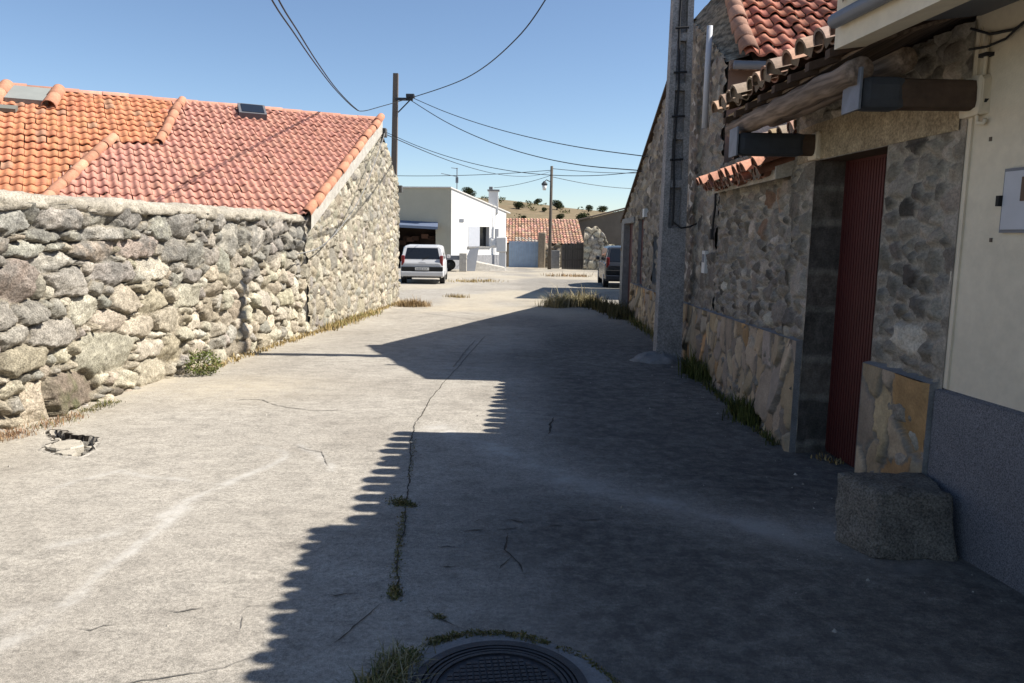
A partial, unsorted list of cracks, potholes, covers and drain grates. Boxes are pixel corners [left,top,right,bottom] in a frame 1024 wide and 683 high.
manhole cover [402,632,612,683]
crack [395,337,484,585]
crack [328,593,376,645]
crack [442,519,523,569]
pothole [37,429,104,458]
